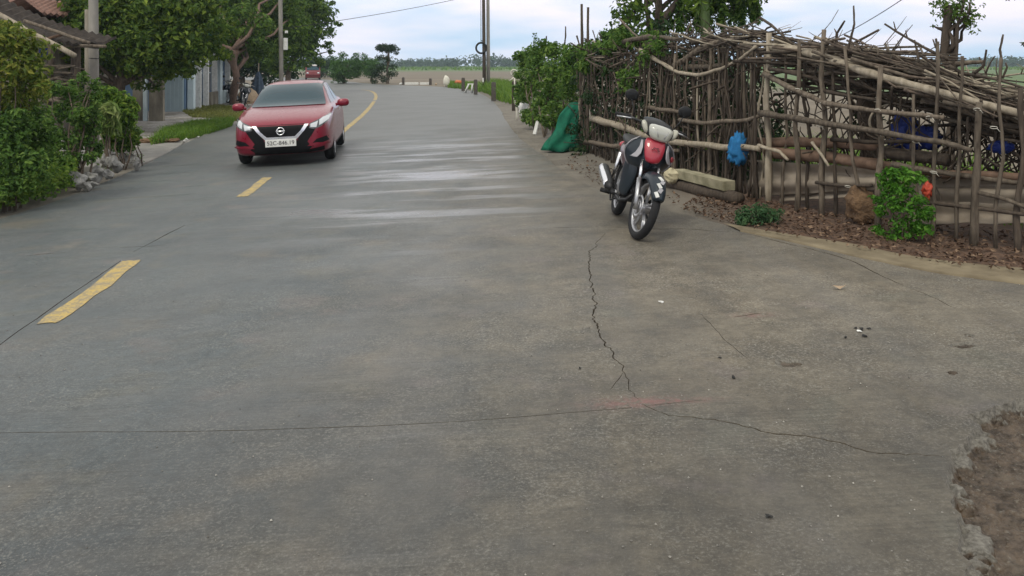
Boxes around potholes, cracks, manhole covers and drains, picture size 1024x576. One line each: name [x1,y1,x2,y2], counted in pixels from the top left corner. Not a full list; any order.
crack [588,235,940,456]
